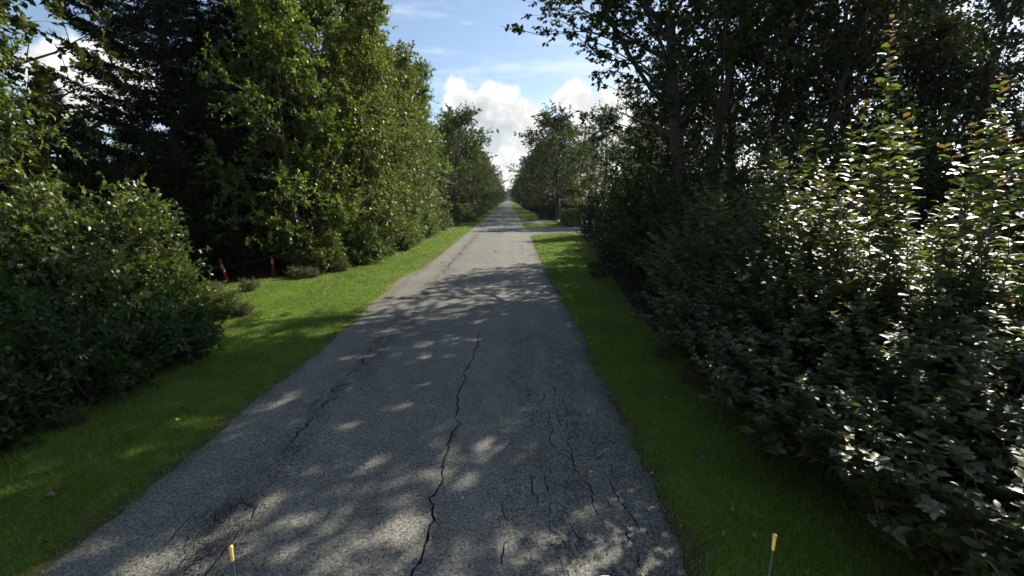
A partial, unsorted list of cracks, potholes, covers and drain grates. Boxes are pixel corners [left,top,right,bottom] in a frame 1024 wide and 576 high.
crack [501,387,655,573]
crack [162,495,261,576]
crack [410,333,479,576]
crack [273,337,384,462]
